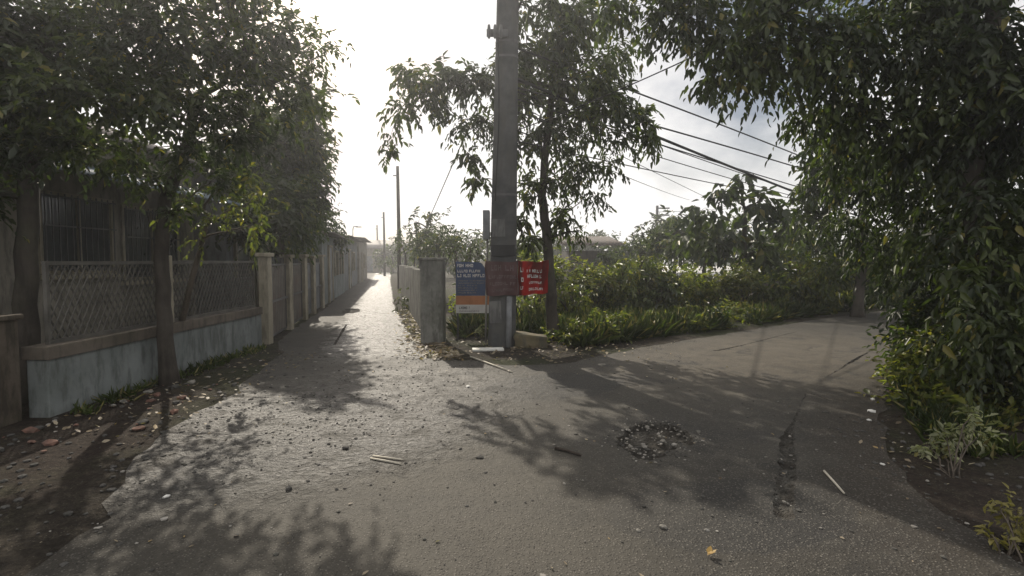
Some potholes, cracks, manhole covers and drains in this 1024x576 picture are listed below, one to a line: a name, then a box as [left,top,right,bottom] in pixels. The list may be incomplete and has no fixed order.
pothole [601,417,705,465]
crack [773,393,840,520]
crack [712,332,794,351]
